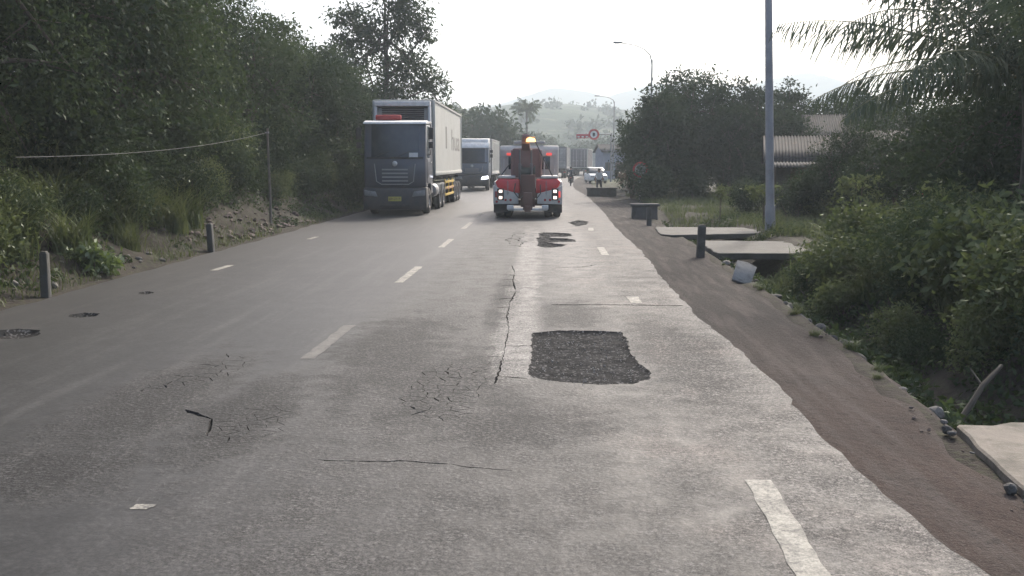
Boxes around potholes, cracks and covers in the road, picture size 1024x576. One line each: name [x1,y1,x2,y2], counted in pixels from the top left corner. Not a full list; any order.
pothole [536,232,576,248]
crack [399,266,527,420]
crack [141,354,245,392]
crack [185,406,292,442]
pothole [0,329,41,339]
crack [323,460,502,470]
